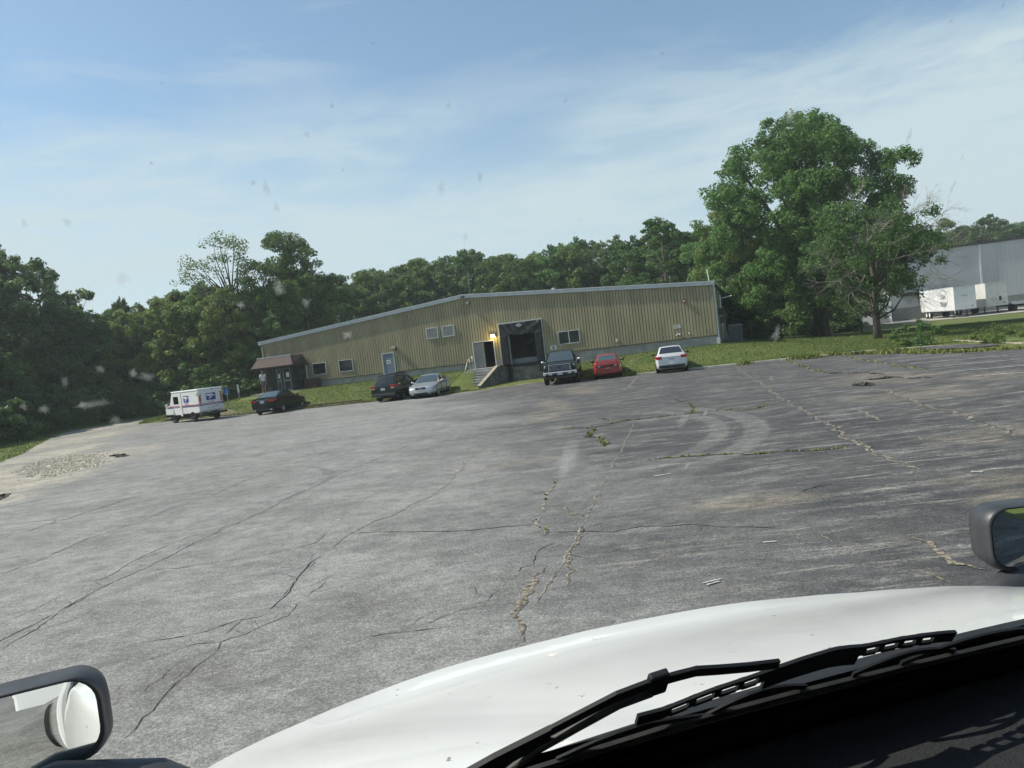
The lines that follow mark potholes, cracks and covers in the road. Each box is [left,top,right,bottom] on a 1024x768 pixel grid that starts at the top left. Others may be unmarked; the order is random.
crack [914,537,988,583]
crack [562,366,1015,491]
crack [0,402,780,738]
